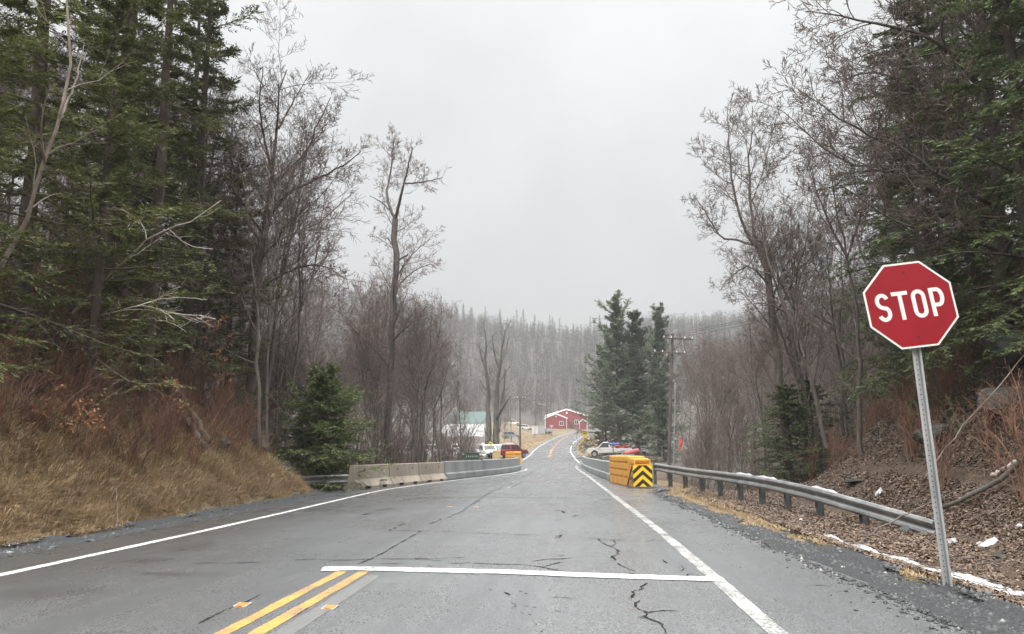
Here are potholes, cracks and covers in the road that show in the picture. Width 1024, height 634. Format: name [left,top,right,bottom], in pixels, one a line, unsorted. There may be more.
crack [595,538,674,633]
crack [240,497,578,572]
